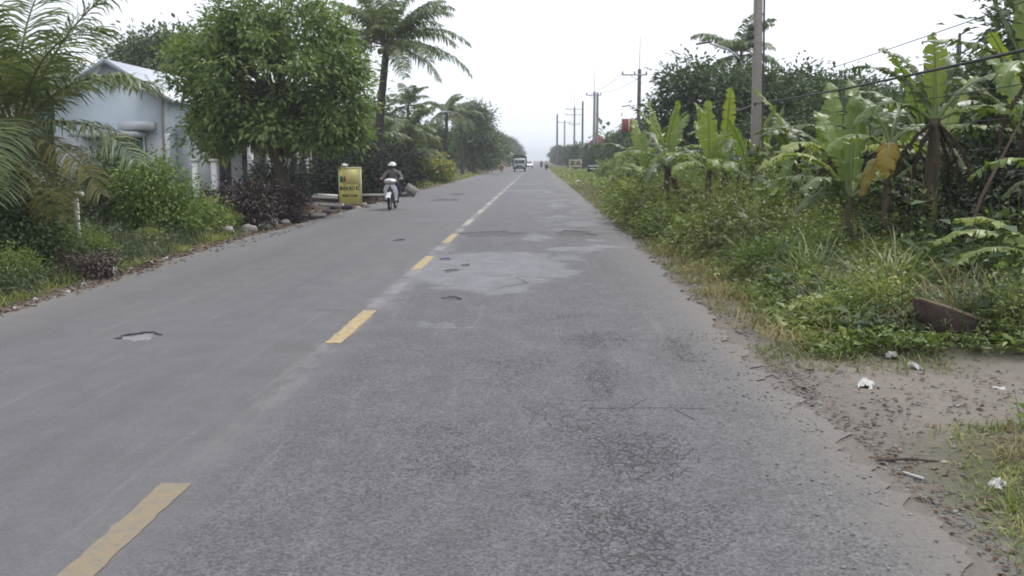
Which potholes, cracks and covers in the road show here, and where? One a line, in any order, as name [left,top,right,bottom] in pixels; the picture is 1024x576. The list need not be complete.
pothole [113,331,163,341]
crack [524,369,709,481]
crack [579,507,676,576]
